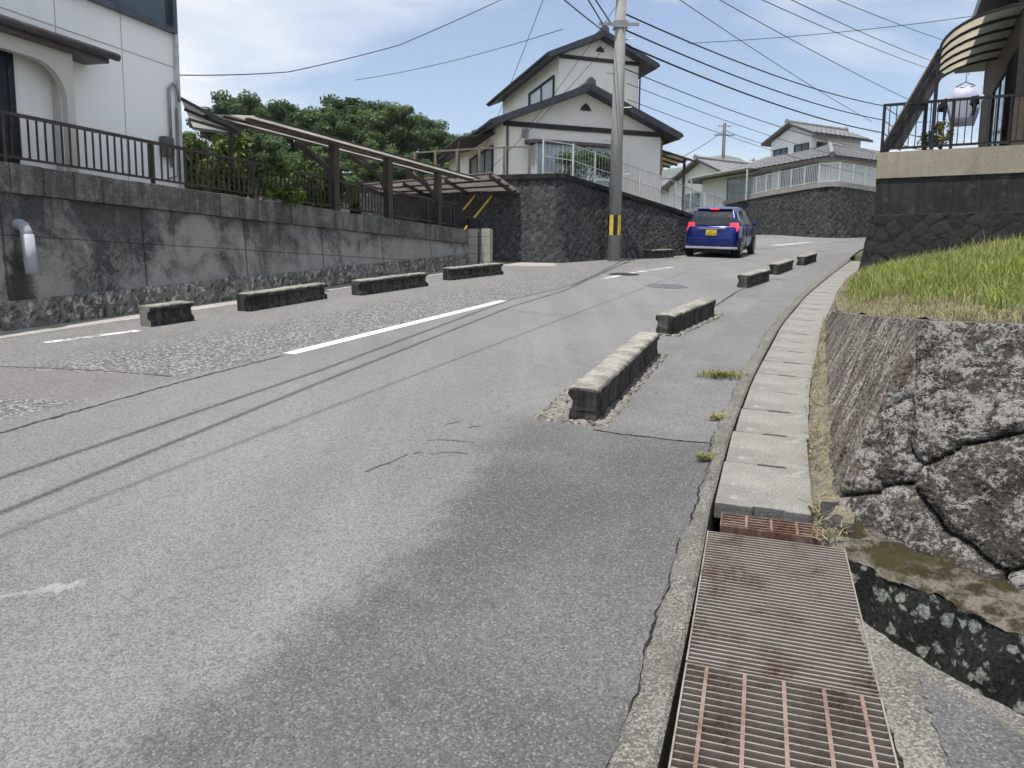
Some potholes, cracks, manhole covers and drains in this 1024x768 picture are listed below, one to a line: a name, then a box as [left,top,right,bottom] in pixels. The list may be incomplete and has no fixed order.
drain grate [686,531,881,698]
drain grate [720,512,825,546]
drain grate [668,662,899,768]
crack [366,421,480,471]
